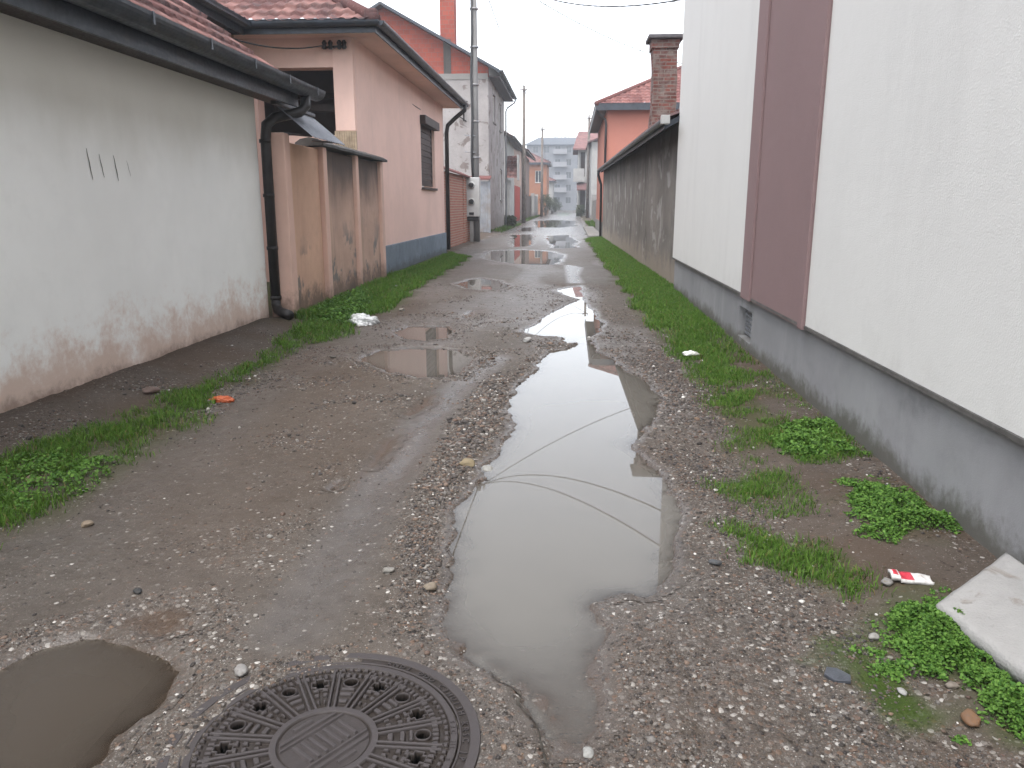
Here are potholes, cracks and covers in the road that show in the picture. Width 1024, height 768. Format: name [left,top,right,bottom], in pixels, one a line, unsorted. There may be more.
manhole cover [156,653,481,768]
pothole [548,284,595,299]
pothole [351,345,483,379]
pothole [513,297,614,343]
pothole [469,249,569,265]
pothole [446,277,518,291]
pothole [385,324,463,341]
pothole [0,625,204,768]
pothole [539,234,585,248]
pothole [503,233,541,247]
pothole [419,337,699,764]
